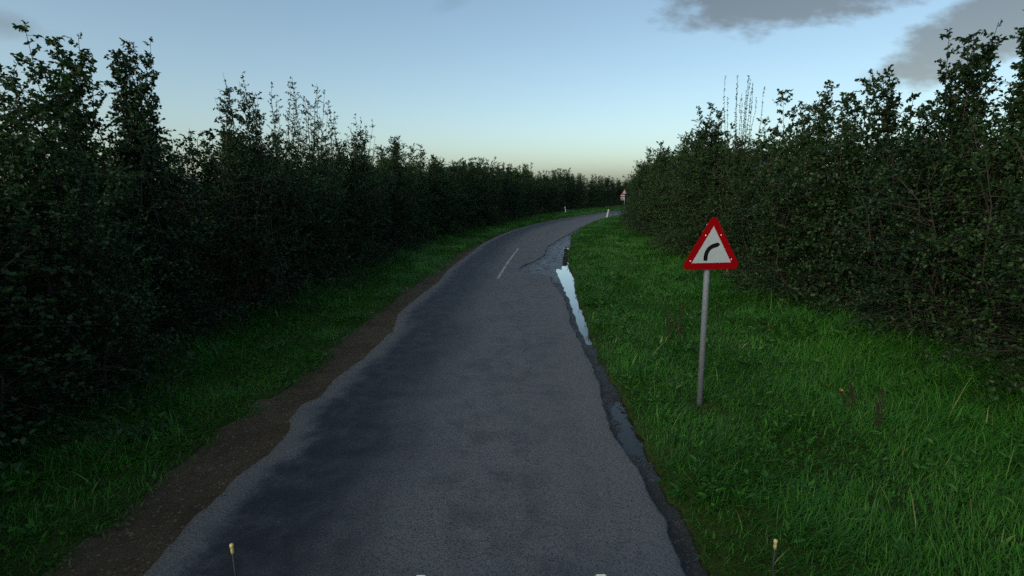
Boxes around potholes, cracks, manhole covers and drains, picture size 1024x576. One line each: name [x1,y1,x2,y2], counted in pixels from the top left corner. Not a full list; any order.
pothole [520,235,571,283]
pothole [603,401,661,485]
